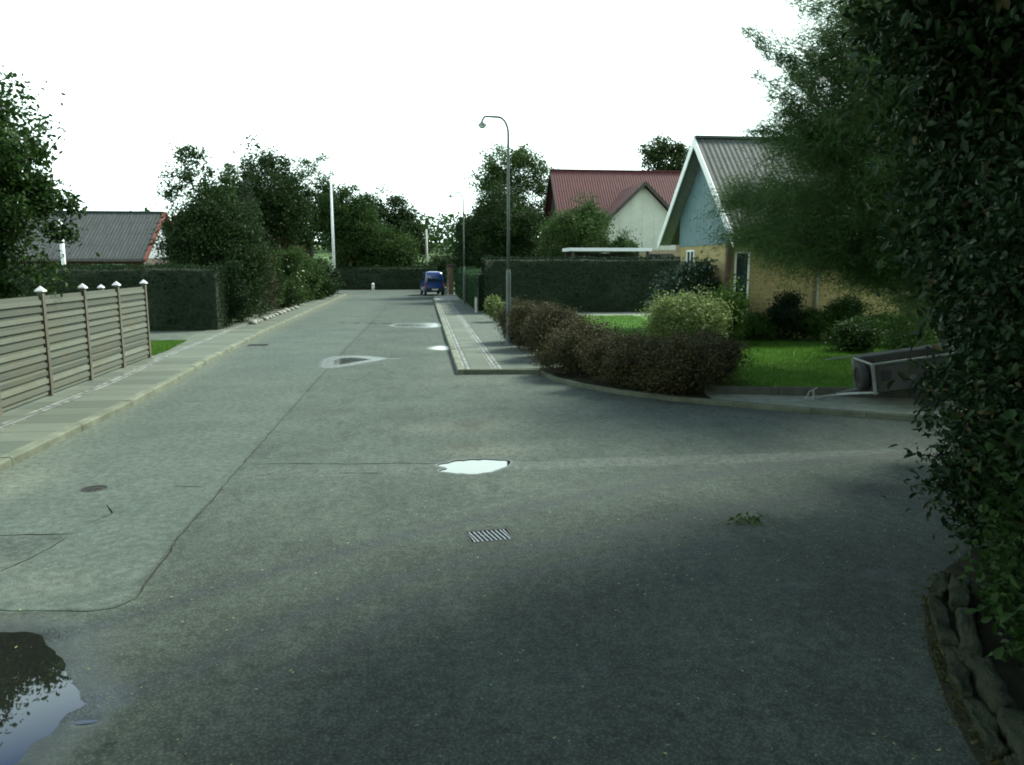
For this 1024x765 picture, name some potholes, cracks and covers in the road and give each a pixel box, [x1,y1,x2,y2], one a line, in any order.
pothole [438,459,511,474]
drain grate [464,528,515,543]
